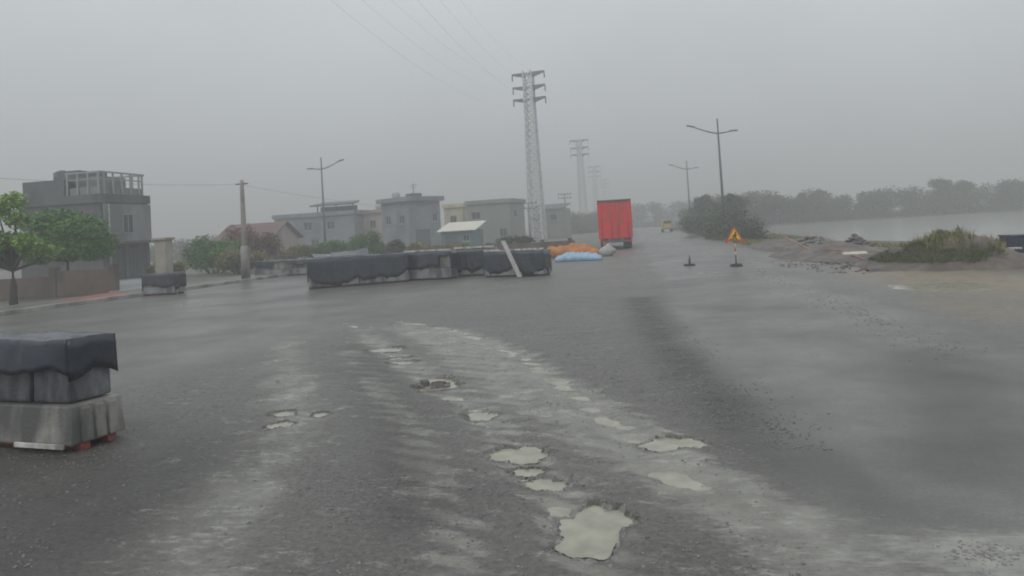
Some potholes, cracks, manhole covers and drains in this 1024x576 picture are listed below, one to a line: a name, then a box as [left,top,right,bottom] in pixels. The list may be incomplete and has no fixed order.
pothole [627,432,713,454]
pothole [506,466,553,480]
pothole [542,495,645,567]
pothole [265,409,298,417]
pothole [358,345,409,353]
pothole [262,419,299,430]
pothole [408,374,464,393]
pothole [459,411,504,423]
pothole [514,473,576,493]
pothole [484,443,559,467]
